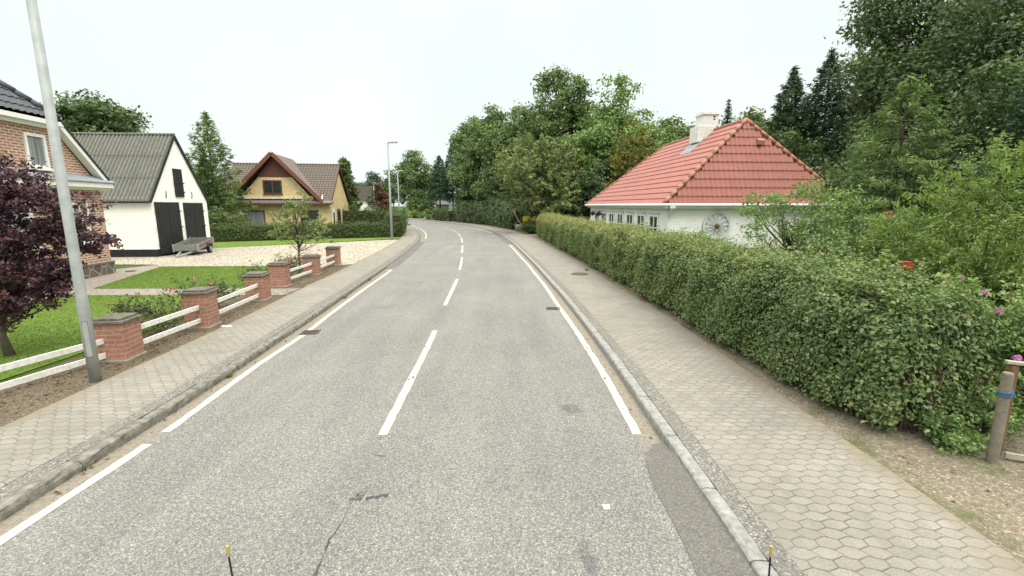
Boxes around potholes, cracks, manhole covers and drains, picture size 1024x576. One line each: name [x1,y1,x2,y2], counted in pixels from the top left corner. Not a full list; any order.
crack [312,491,389,576]
